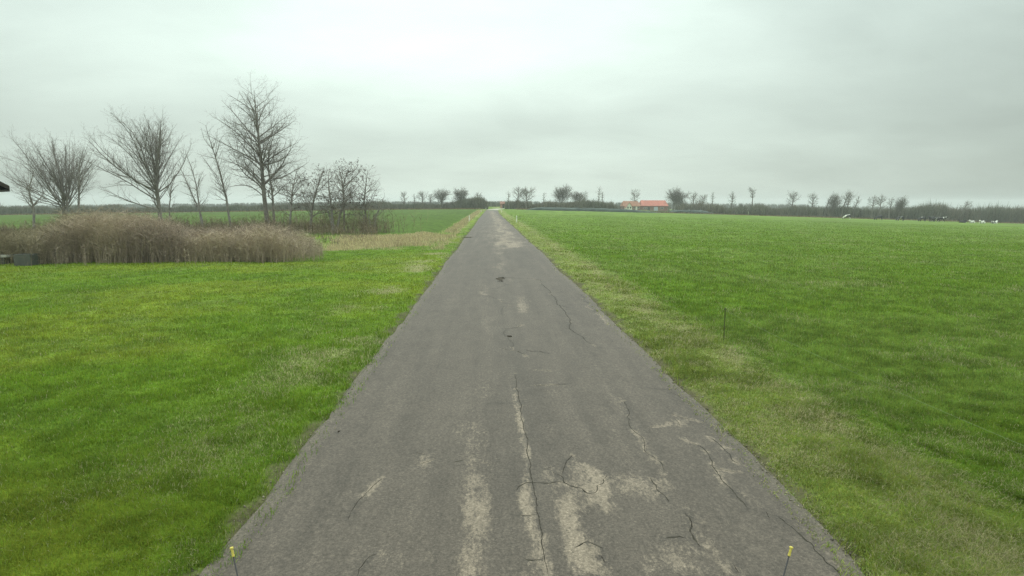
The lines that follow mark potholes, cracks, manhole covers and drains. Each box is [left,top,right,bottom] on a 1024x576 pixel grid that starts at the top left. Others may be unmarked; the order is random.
crack [489,288,607,572]
crack [766,512,840,574]
crack [623,388,747,546]
